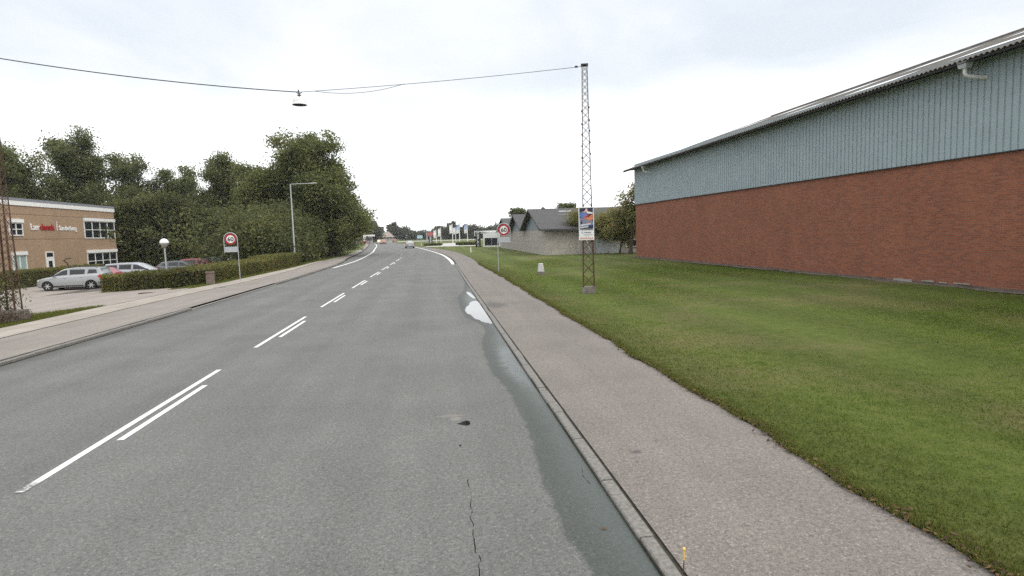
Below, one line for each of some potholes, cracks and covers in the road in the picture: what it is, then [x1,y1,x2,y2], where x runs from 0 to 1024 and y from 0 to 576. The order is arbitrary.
crack [467,479,481,576]
